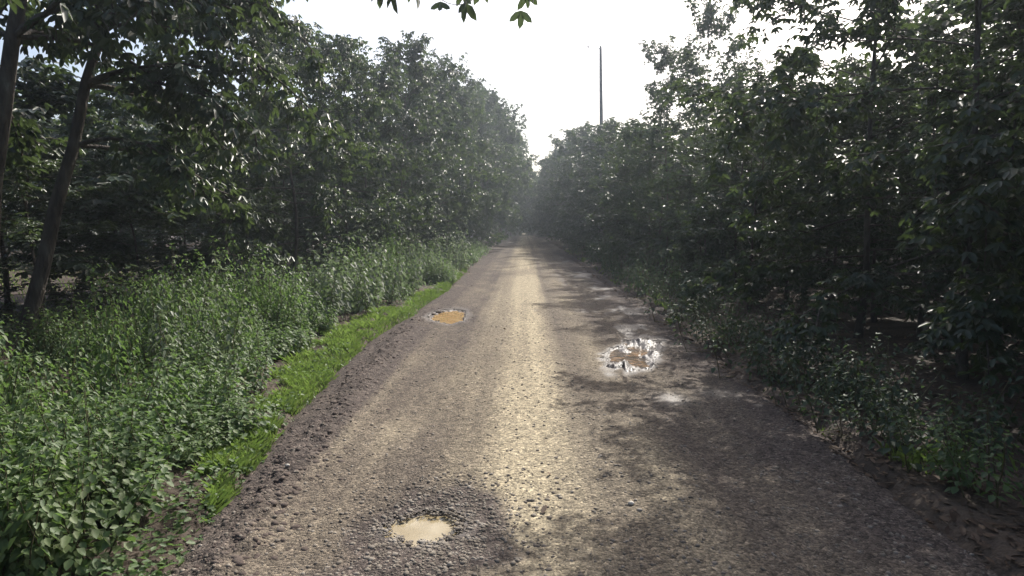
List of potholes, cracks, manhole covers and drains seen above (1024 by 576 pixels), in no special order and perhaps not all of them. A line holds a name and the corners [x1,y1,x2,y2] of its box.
pothole [383,511,465,547]
pothole [427,309,468,324]
pothole [599,338,663,372]
